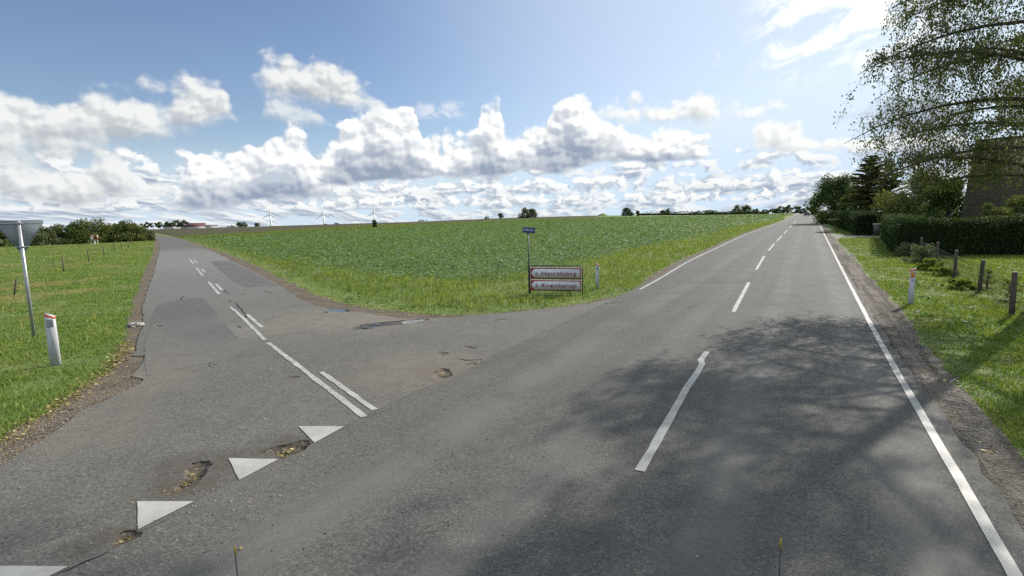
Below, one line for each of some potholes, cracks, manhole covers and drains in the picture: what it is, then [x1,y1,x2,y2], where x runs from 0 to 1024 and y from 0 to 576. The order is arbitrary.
pothole [433,368,452,379]
pothole [159,460,213,496]
pothole [110,530,143,549]
pothole [258,440,312,458]
